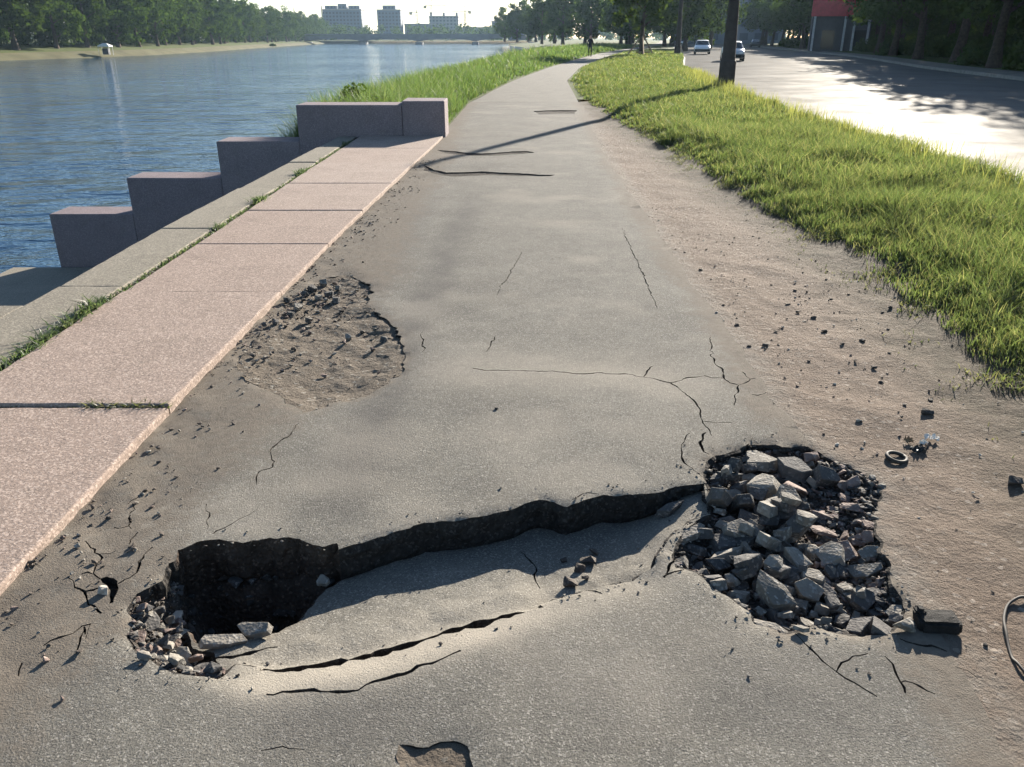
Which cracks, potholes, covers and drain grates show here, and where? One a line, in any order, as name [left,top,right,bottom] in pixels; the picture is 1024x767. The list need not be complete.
crack [622,229,657,307]
pothole [672,445,905,637]
pothole [126,484,709,680]
crack [216,552,543,696]
crack [43,496,153,650]
pothole [396,741,473,767]
crack [795,633,977,697]
crack [663,561,684,578]
crack [474,337,766,477]
crack [255,424,297,485]
